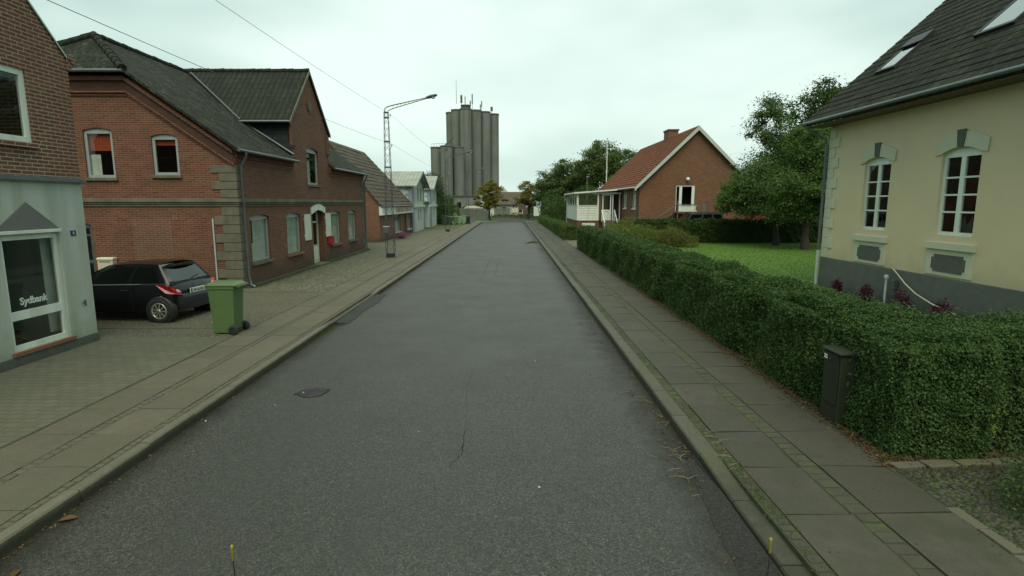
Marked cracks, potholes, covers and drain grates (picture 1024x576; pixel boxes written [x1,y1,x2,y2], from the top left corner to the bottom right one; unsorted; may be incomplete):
manhole cover [293,387,330,398]
crack [449,368,473,467]
